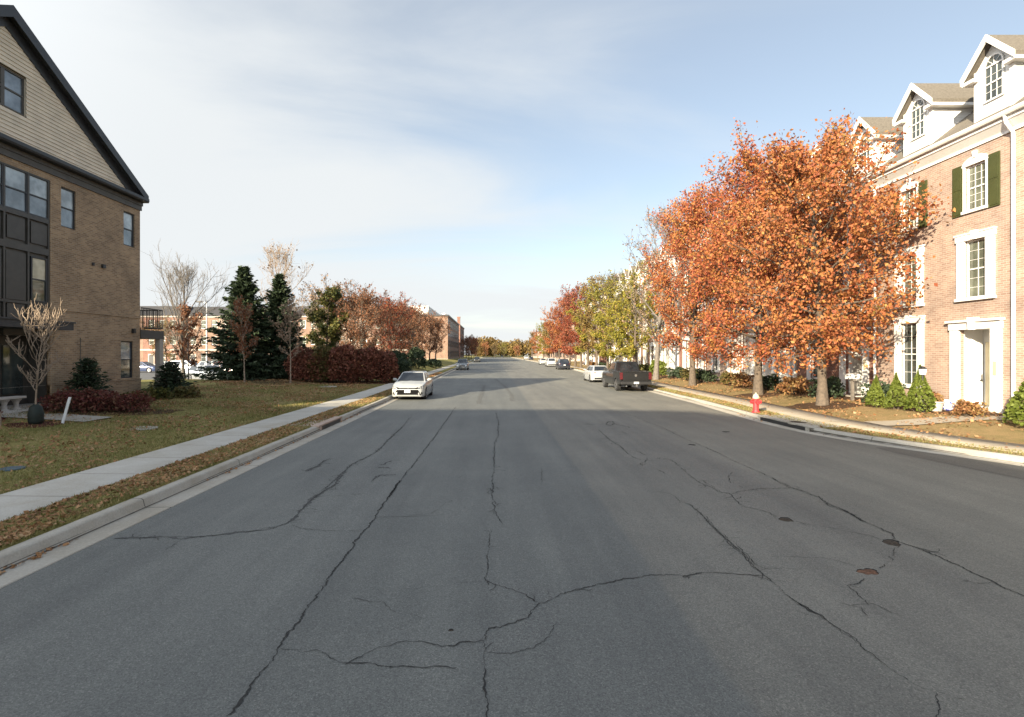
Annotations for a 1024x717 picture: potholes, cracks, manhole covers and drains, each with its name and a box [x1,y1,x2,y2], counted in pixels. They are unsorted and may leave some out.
crack [114,418,409,547]
drain grate [757,415,840,431]
crack [281,413,963,717]
